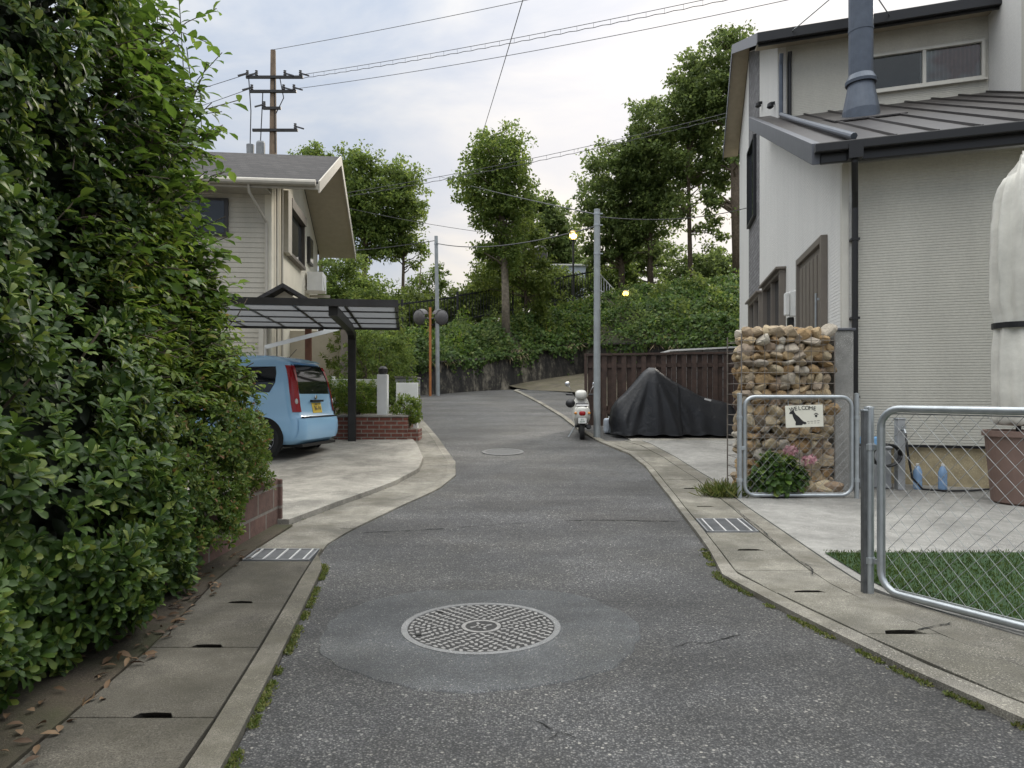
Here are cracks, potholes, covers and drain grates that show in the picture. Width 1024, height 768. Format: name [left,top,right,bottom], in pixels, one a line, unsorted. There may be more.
manhole cover [482,448,524,456]
drain grate [696,518,759,534]
manhole cover [401,603,561,655]
drain grate [242,548,320,562]
